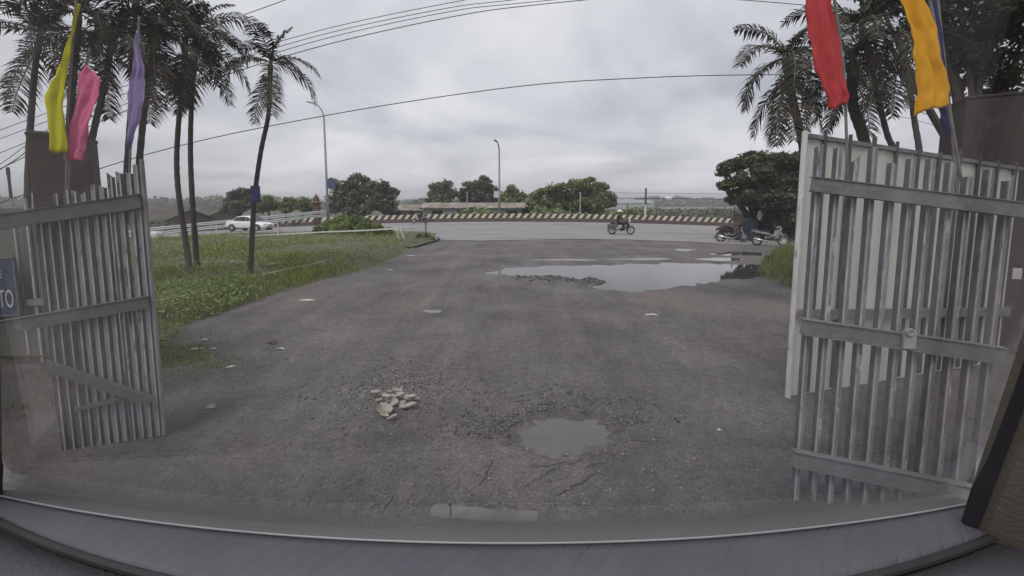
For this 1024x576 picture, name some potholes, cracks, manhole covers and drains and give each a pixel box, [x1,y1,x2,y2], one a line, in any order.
crack [525,460,602,497]
pothole [496,404,635,464]
crack [374,489,396,516]
crack [479,460,495,486]
